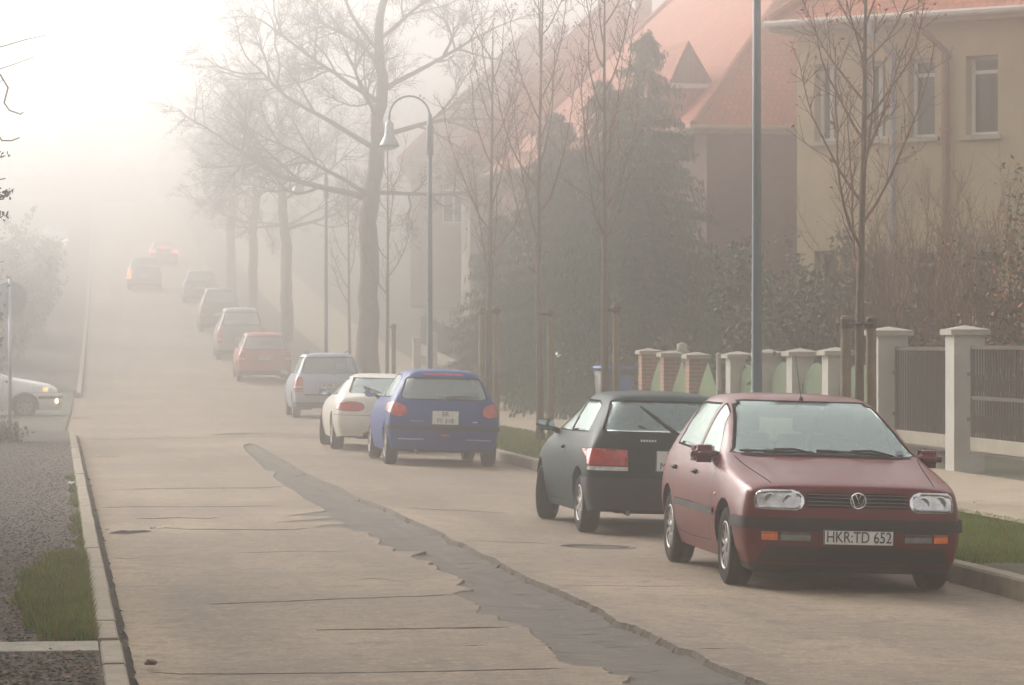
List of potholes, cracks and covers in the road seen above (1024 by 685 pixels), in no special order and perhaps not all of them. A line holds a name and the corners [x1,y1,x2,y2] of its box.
crack [107,506,307,530]
crack [221,578,440,604]
crack [324,627,499,646]
